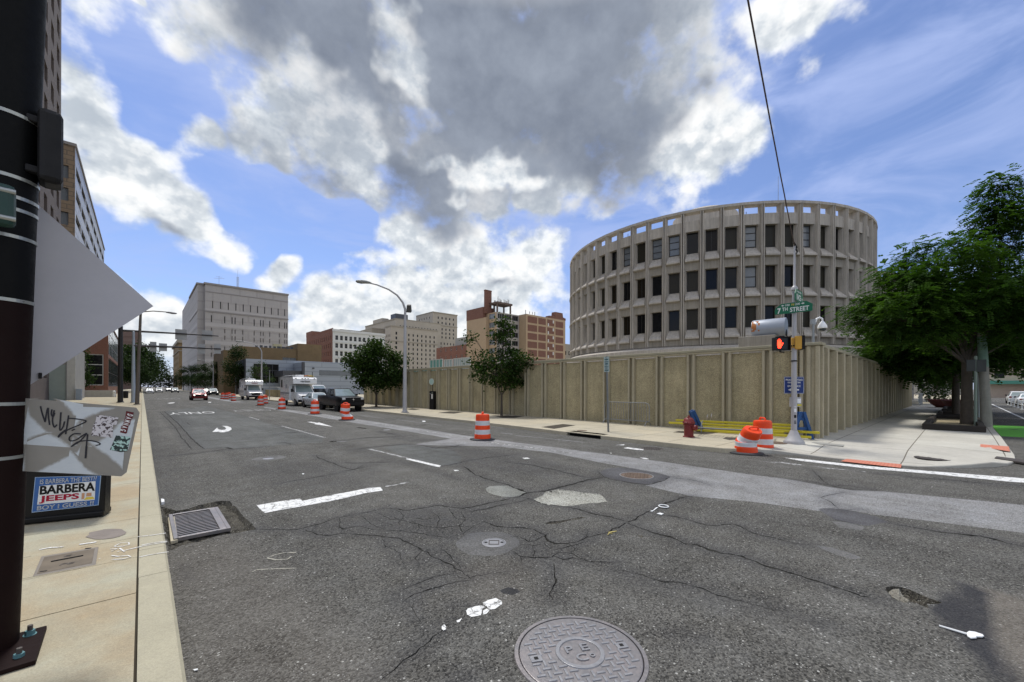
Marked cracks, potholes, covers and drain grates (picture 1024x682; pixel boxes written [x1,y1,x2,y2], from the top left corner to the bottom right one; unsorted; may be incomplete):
manhole cover [514,616,649,682]
utility cover [482,538,506,547]
crack [160,412,210,449]
utility cover [33,547,98,576]
drain grate [169,507,231,541]
crack [263,445,875,679]
pothole [885,586,942,608]
